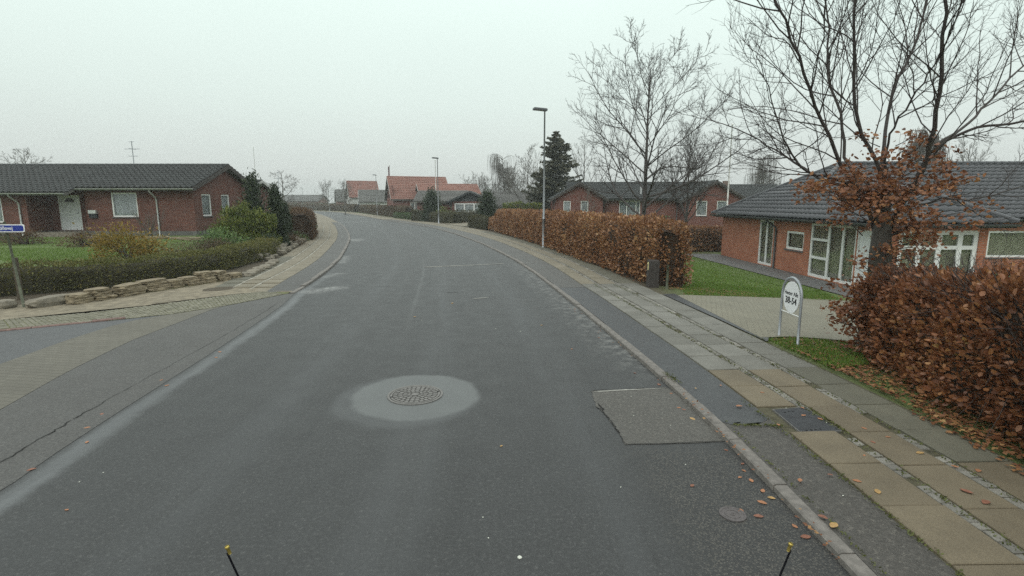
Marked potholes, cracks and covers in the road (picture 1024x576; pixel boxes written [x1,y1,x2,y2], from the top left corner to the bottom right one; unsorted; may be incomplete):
manhole cover [387,385,443,405]
manhole cover [772,407,842,433]
manhole cover [719,506,747,522]
